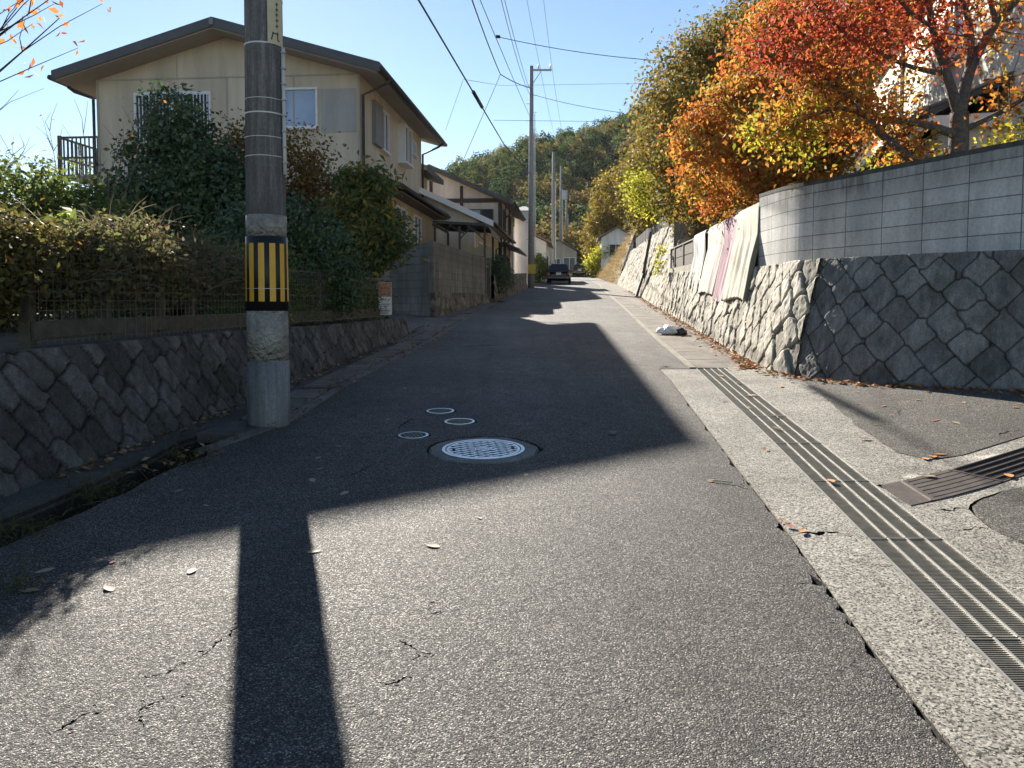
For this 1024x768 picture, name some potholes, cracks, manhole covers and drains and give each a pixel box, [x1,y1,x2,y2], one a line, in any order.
drain grate [696,368,740,381]
drain grate [811,480,943,538]
drain grate [726,395,786,416]
crack [54,705,99,734]
drain grate [867,538,1024,639]
manhole cover [427,437,541,464]
crack [376,641,433,695]
drain grate [966,637,1024,697]
crack [932,507,992,531]
drain grate [709,380,760,397]
crack [138,696,185,727]
